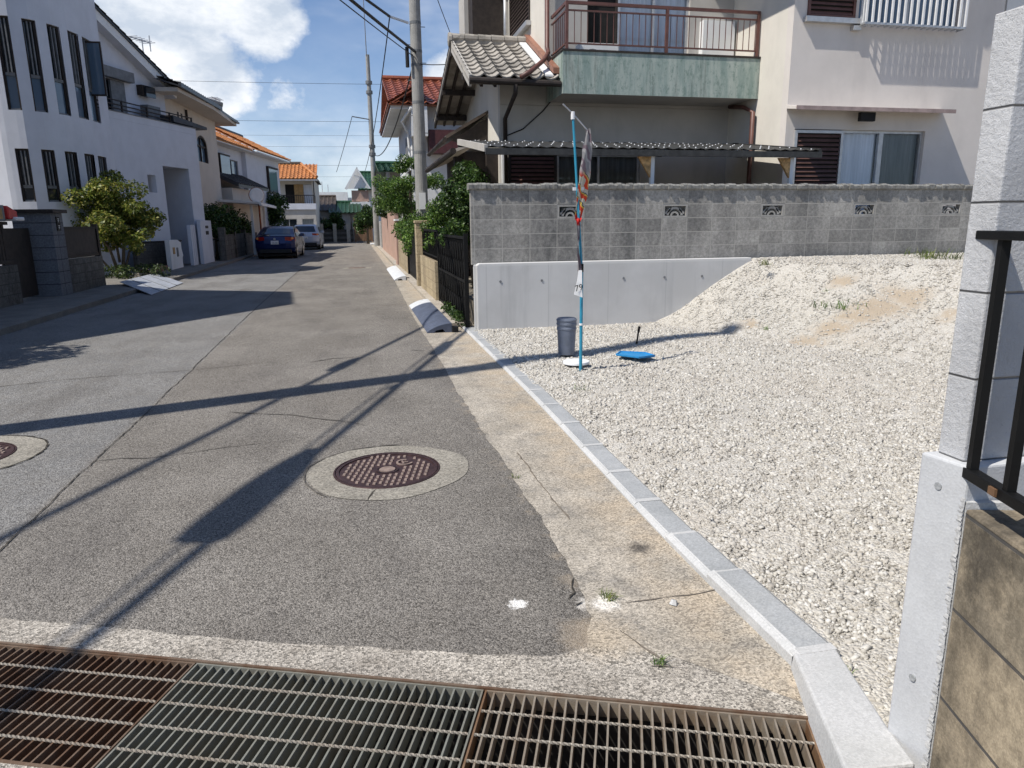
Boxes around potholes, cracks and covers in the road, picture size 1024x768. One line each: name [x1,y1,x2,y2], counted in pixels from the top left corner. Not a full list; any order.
drain grate [462,690,825,768]
crack [517,452,570,519]
drain grate [95,663,484,768]
drain grate [0,644,196,768]
manhole cover [306,446,469,500]
crack [620,630,673,667]
manhole cover [0,436,49,468]
